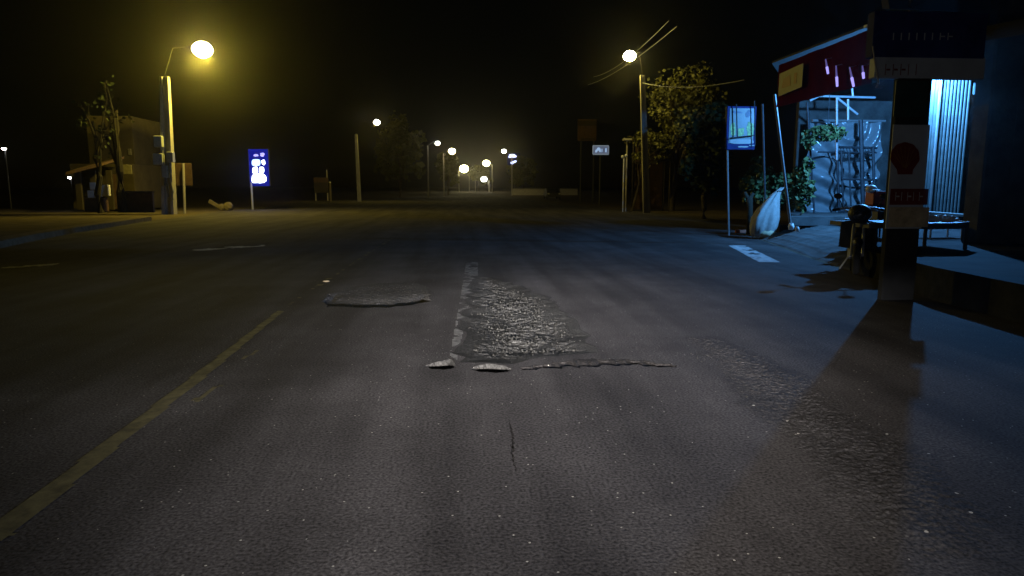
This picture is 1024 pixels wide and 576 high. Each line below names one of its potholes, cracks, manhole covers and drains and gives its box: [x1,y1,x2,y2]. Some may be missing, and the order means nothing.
pothole [452,276,599,364]
crack [520,358,677,370]
